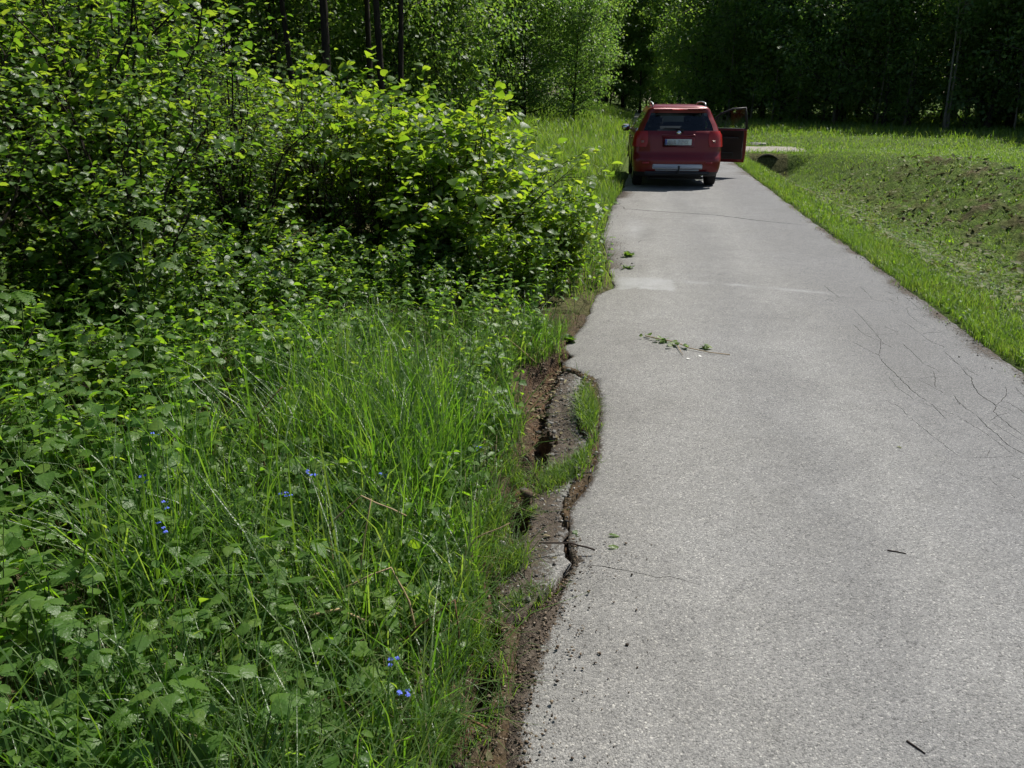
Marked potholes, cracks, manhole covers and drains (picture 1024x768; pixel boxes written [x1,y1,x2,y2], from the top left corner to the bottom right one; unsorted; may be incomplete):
crack [826,287,1024,498]
crack [449,353,707,768]
